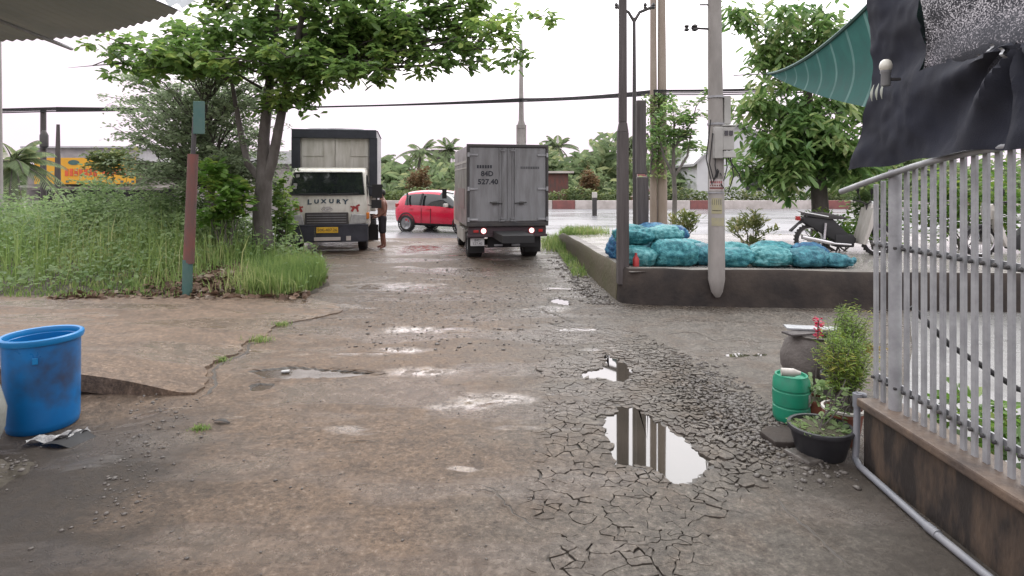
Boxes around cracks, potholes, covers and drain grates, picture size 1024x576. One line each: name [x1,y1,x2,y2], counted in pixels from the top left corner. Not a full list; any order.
crack [289,317,345,325]
pothole [239,380,283,394]
pothole [242,365,385,381]
pothole [601,404,714,485]
crack [465,310,853,576]
crack [201,342,264,397]
